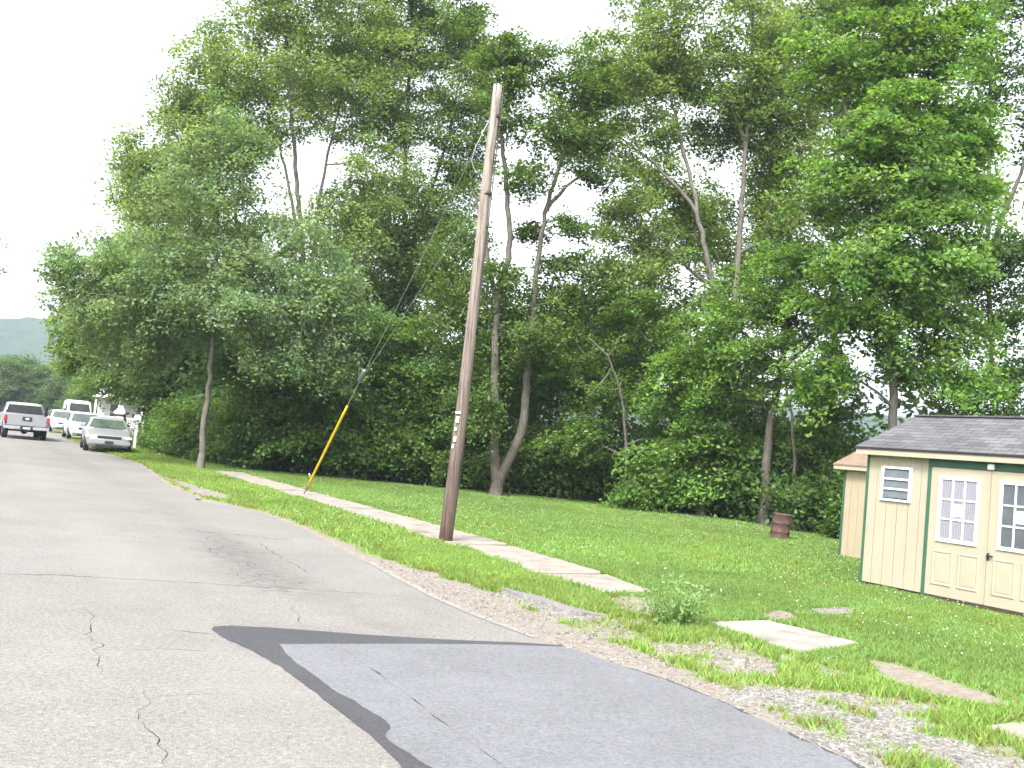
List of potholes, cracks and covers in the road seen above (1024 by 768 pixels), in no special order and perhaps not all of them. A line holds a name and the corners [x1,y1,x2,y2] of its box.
crack [0,527,395,596]
crack [86,611,215,672]
crack [137,689,236,768]
